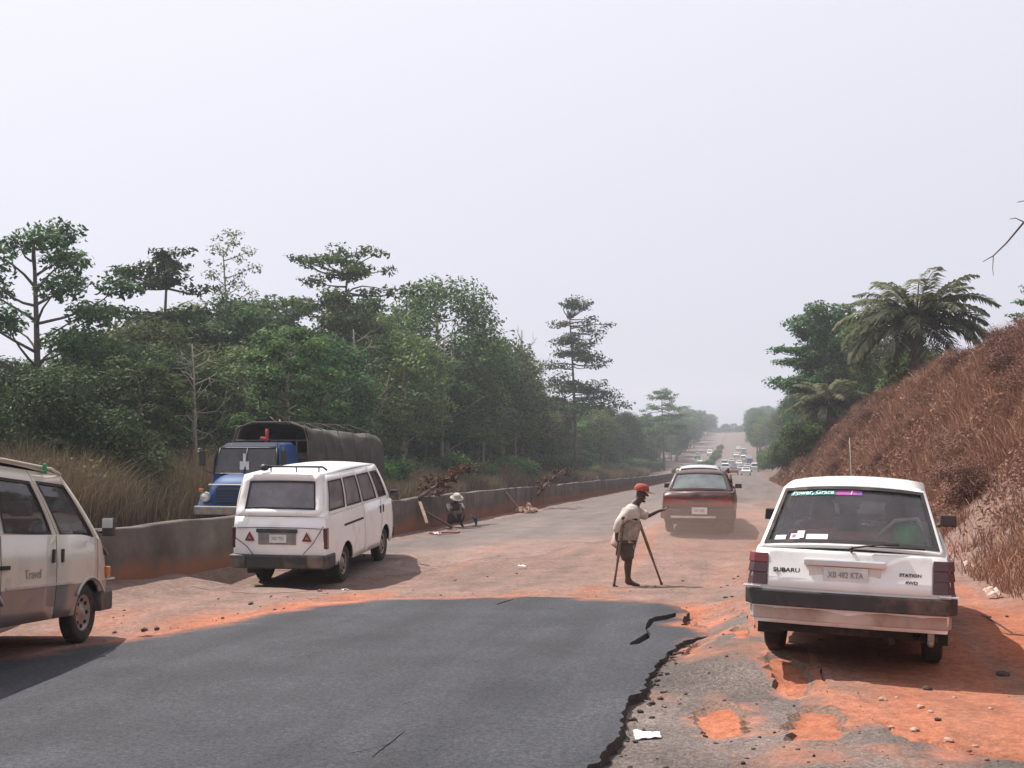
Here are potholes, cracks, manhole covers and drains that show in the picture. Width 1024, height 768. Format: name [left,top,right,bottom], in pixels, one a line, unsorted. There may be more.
pothole [756,651,816,698]
crack [630,613,676,645]
crack [347,732,404,757]
pothole [687,702,753,739]
pothole [779,705,852,741]
